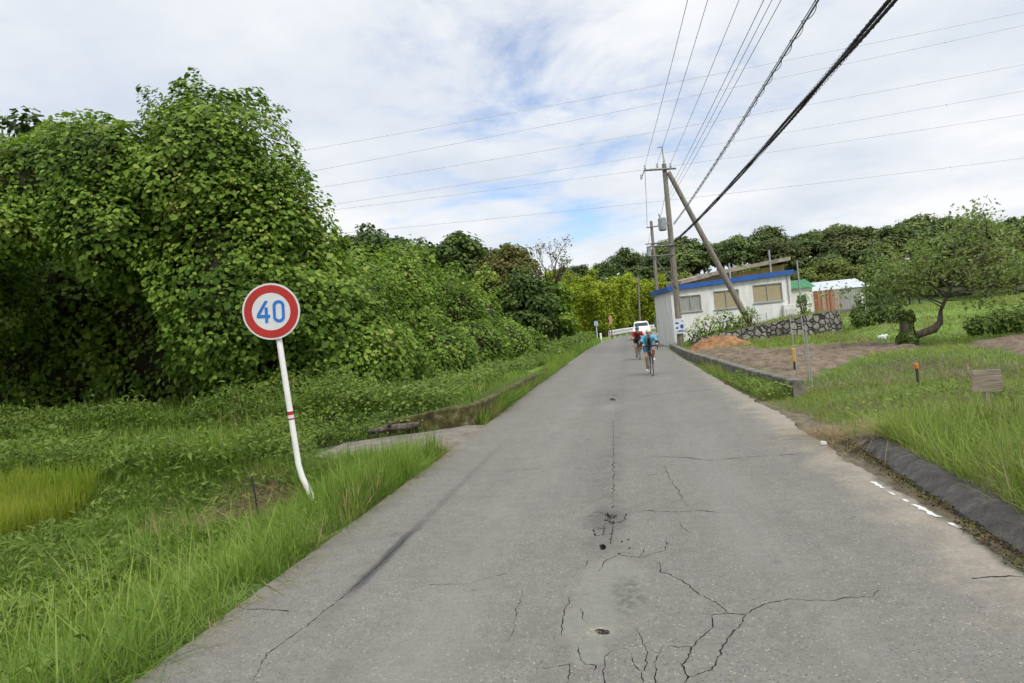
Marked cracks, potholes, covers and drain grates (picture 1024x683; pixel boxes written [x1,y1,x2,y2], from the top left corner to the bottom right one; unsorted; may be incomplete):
crack [543,423,879,683]
